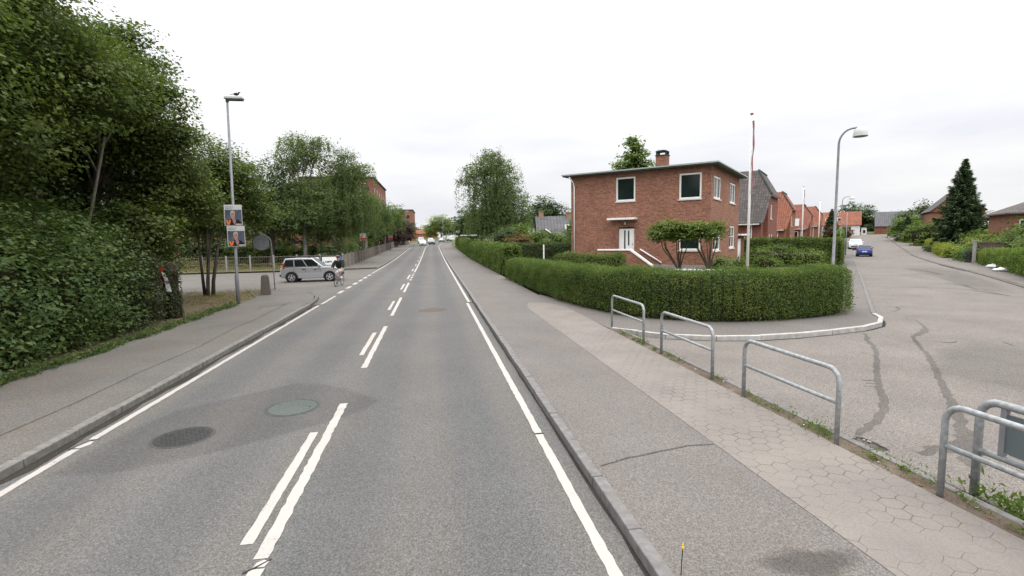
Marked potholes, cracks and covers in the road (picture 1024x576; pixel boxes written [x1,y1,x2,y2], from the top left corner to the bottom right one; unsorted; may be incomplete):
manhole cover [264,399,320,416]
crack [600,444,714,466]
manhole cover [149,426,216,449]
